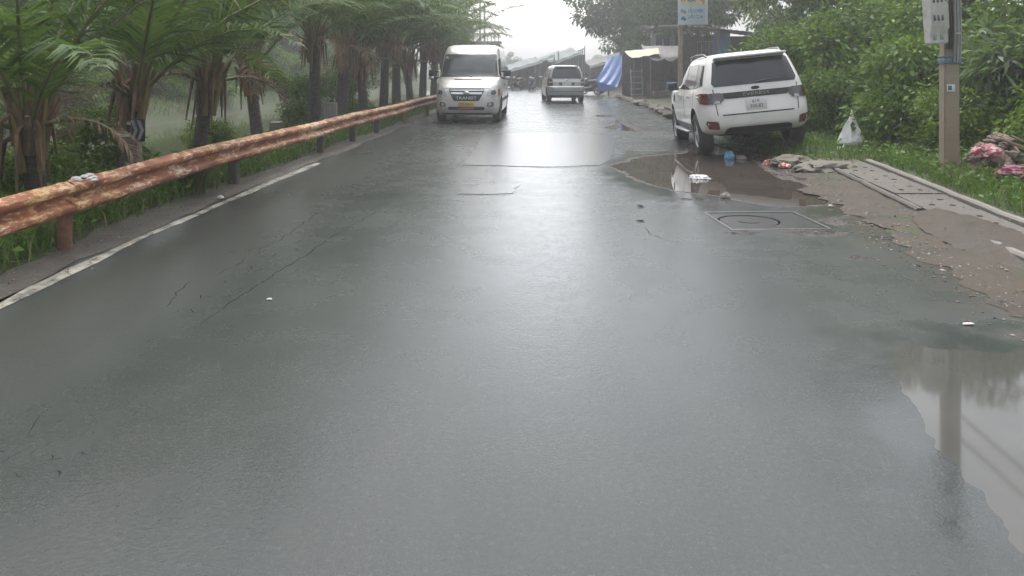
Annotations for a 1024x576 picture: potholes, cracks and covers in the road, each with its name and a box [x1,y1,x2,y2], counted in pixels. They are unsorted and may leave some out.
manhole cover [703,211,832,230]
crack [1,412,84,479]
crack [166,204,391,326]
